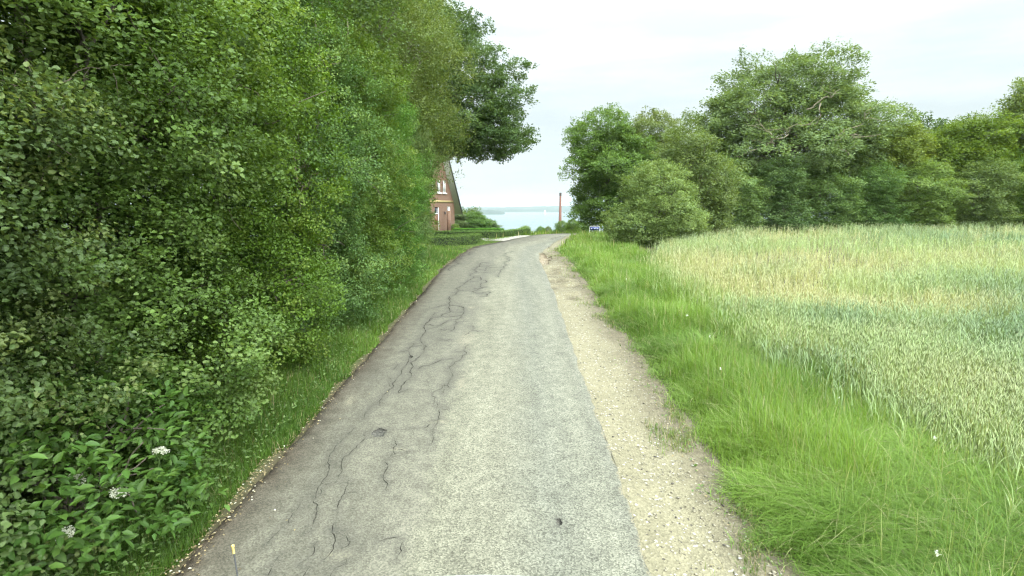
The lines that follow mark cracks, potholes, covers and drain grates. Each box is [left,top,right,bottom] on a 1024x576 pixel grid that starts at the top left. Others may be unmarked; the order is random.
crack [266,259,510,576]
